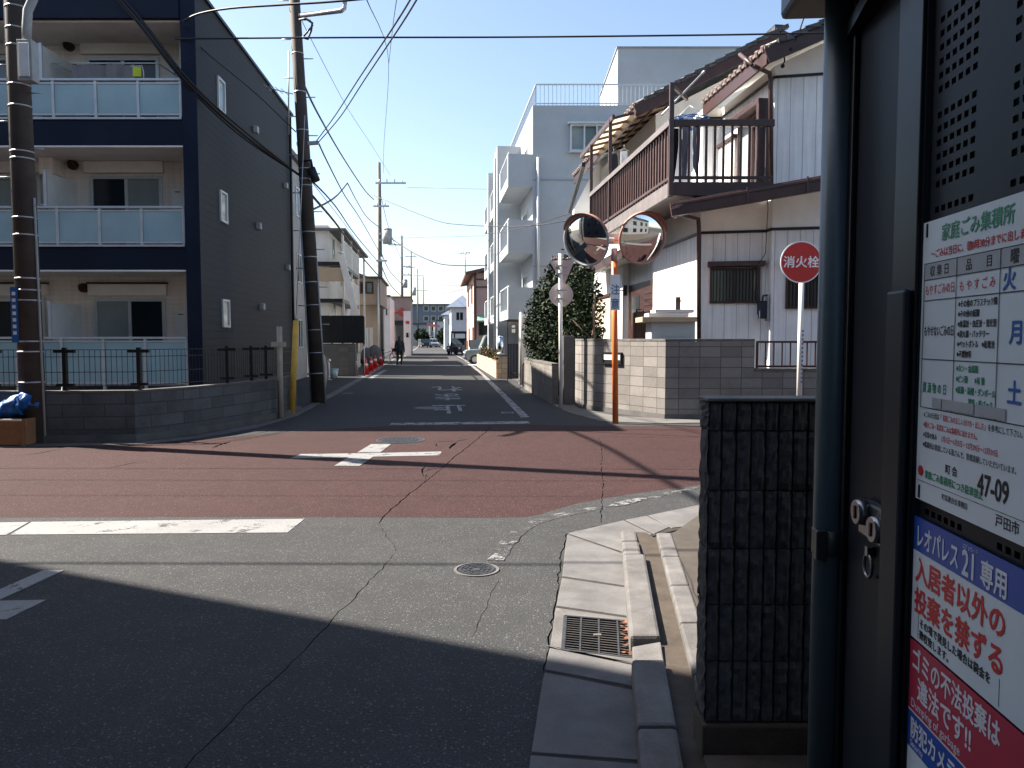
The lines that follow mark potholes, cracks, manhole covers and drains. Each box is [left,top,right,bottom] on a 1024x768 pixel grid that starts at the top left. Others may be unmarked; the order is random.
crack [543,439,605,673]
crack [185,427,490,768]
manhole cover [454,562,499,577]
drain grate [561,615,632,658]
